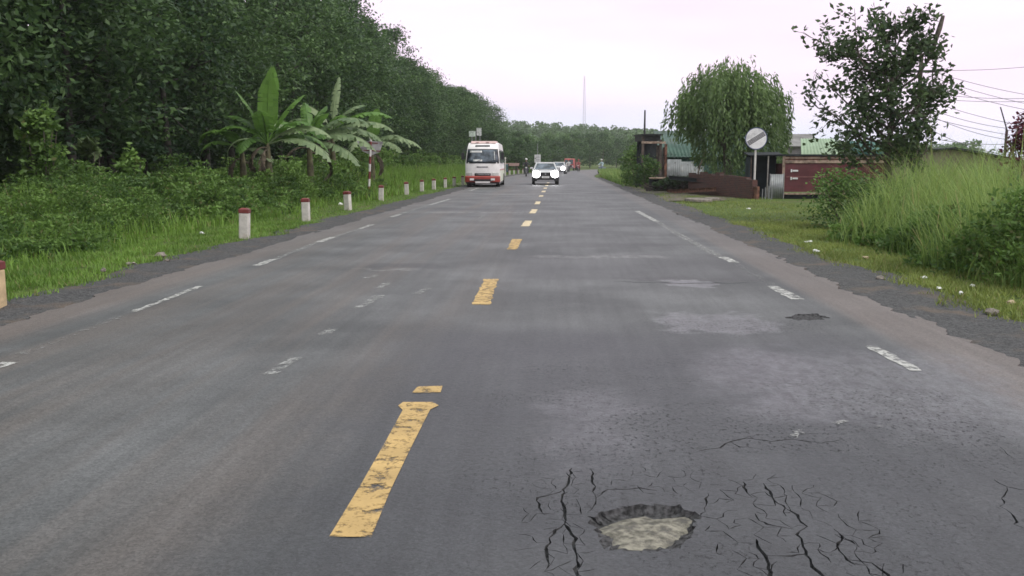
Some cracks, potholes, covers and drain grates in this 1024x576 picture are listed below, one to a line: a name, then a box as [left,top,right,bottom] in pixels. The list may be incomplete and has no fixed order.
crack [700,433,838,451]
pothole [785,313,830,321]
crack [515,468,709,576]
pothole [588,504,702,553]
crack [995,480,1024,528]
crack [700,474,904,576]
